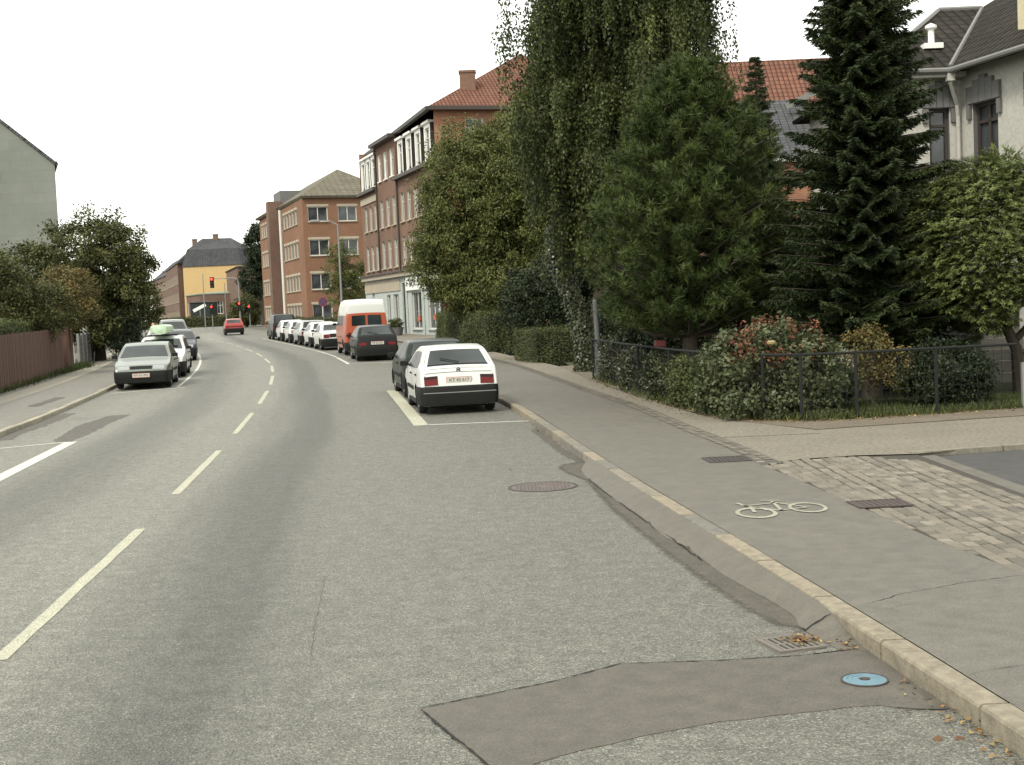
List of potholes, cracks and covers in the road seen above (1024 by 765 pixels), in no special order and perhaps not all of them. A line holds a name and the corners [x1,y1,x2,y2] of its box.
manhole cover [841,672,889,687]
drain grate [755,634,827,653]
crack [866,575,1020,604]
manhole cover [508,481,578,492]
drain grate [701,455,753,463]
drain grate [846,498,914,508]
